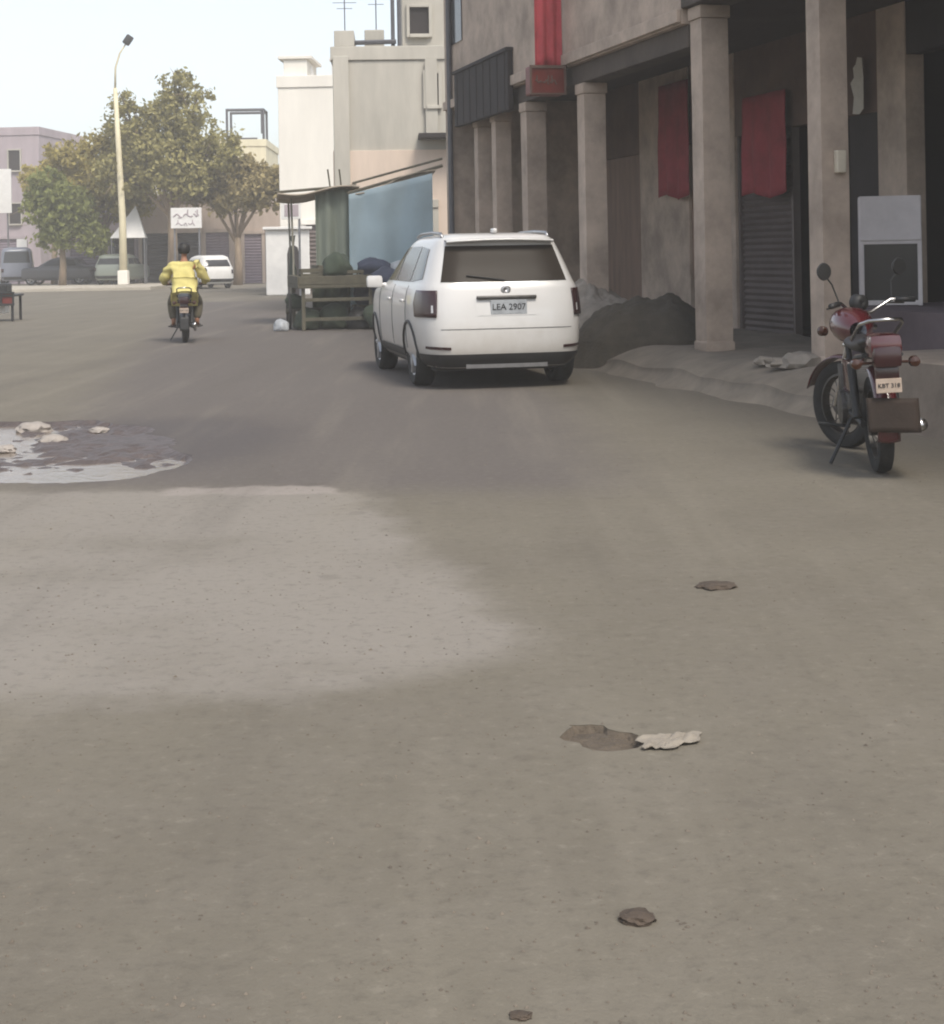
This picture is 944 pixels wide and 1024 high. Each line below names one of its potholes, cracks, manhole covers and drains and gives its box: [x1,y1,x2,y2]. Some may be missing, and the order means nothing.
pothole [560,725,643,751]
pothole [0,420,192,478]
